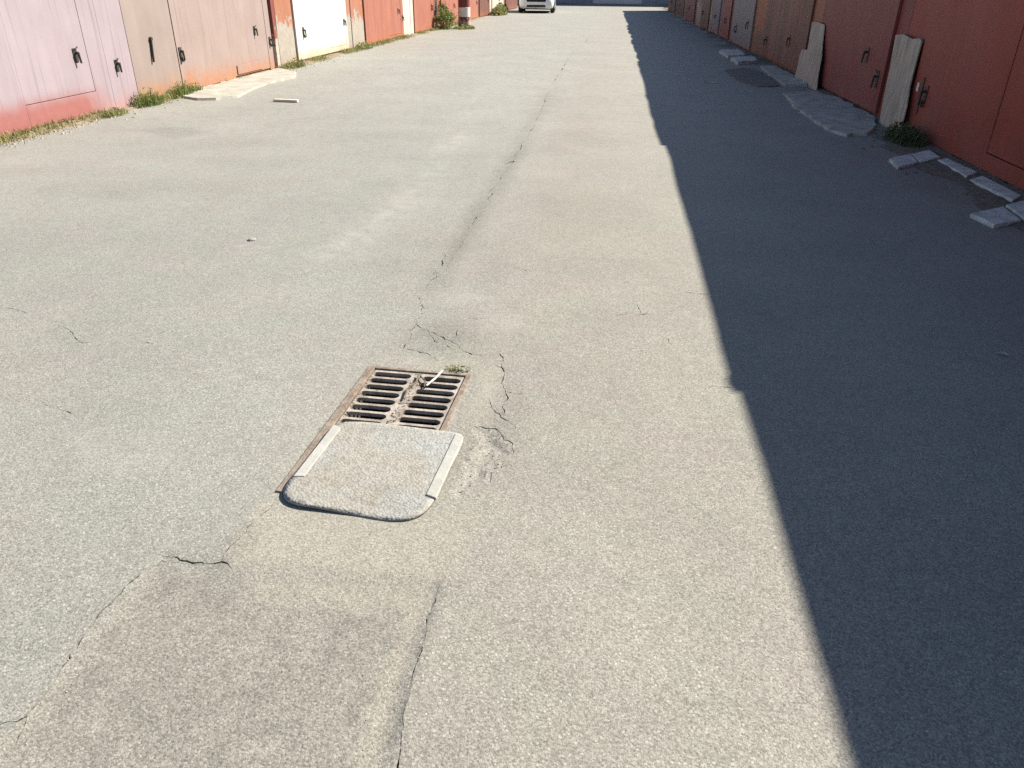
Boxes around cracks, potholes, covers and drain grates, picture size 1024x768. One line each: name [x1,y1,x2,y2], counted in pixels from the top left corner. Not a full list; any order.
crack [403,40,587,429]
crack [396,585,440,768]
drain grate [276,365,472,493]
crack [0,503,274,765]
